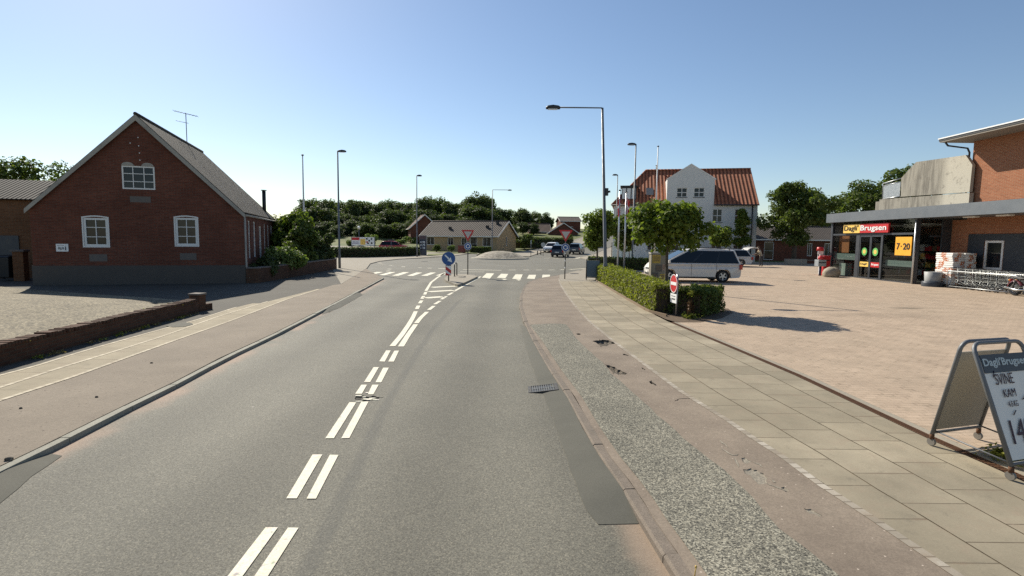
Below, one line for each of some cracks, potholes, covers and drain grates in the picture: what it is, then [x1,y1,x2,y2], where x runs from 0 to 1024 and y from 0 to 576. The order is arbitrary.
pothole [355,392,379,402]
drain grate [528,383,559,393]
crack [720,440,787,491]
